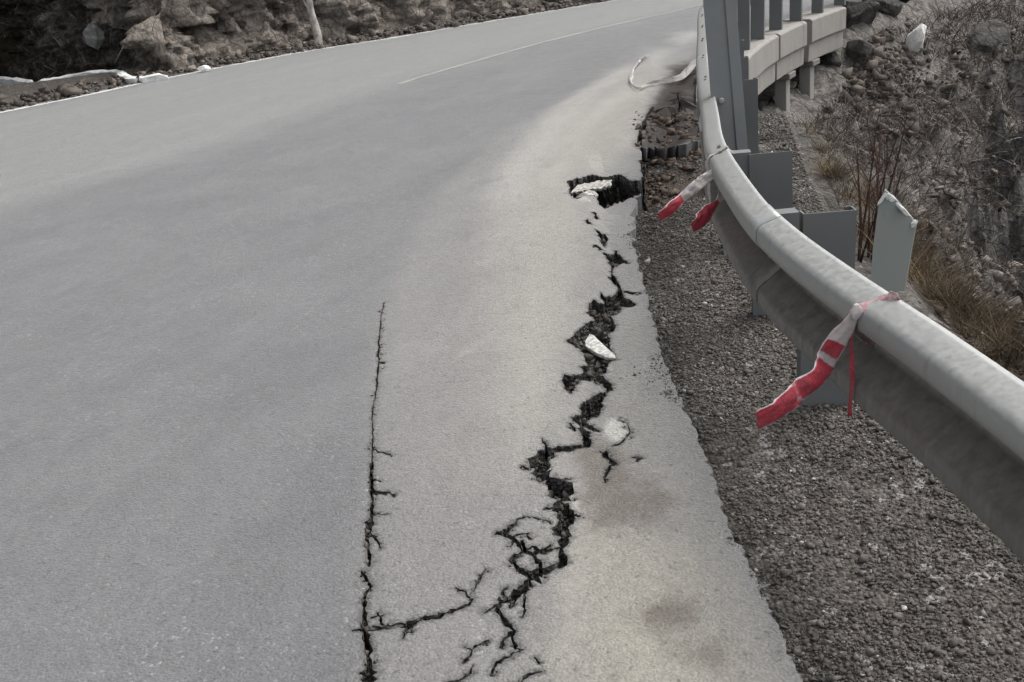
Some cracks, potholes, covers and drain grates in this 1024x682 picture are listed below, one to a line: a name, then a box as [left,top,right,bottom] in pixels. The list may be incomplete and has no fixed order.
crack [352,204,642,682]
pothole [567,174,648,251]
